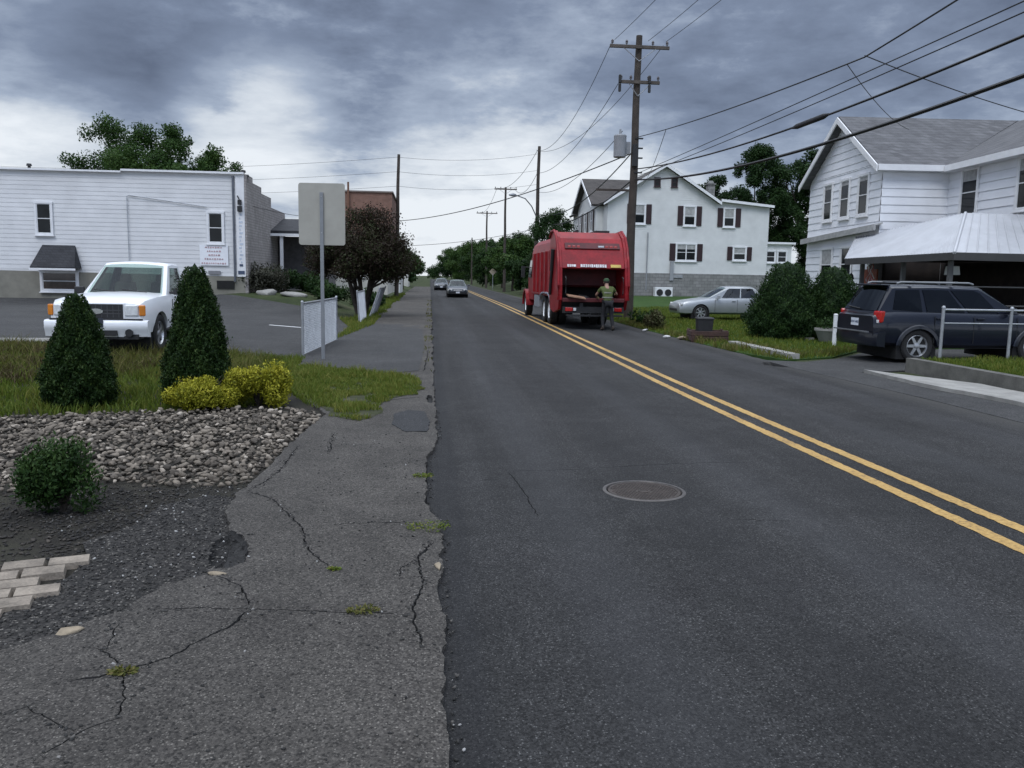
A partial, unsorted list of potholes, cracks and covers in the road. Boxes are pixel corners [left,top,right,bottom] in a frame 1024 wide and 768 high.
crack [399,541,434,645]
crack [495,462,732,515]
manhole cover [603,480,686,502]
crack [1,576,403,758]
pothole [208,530,248,568]
crack [249,448,328,566]
